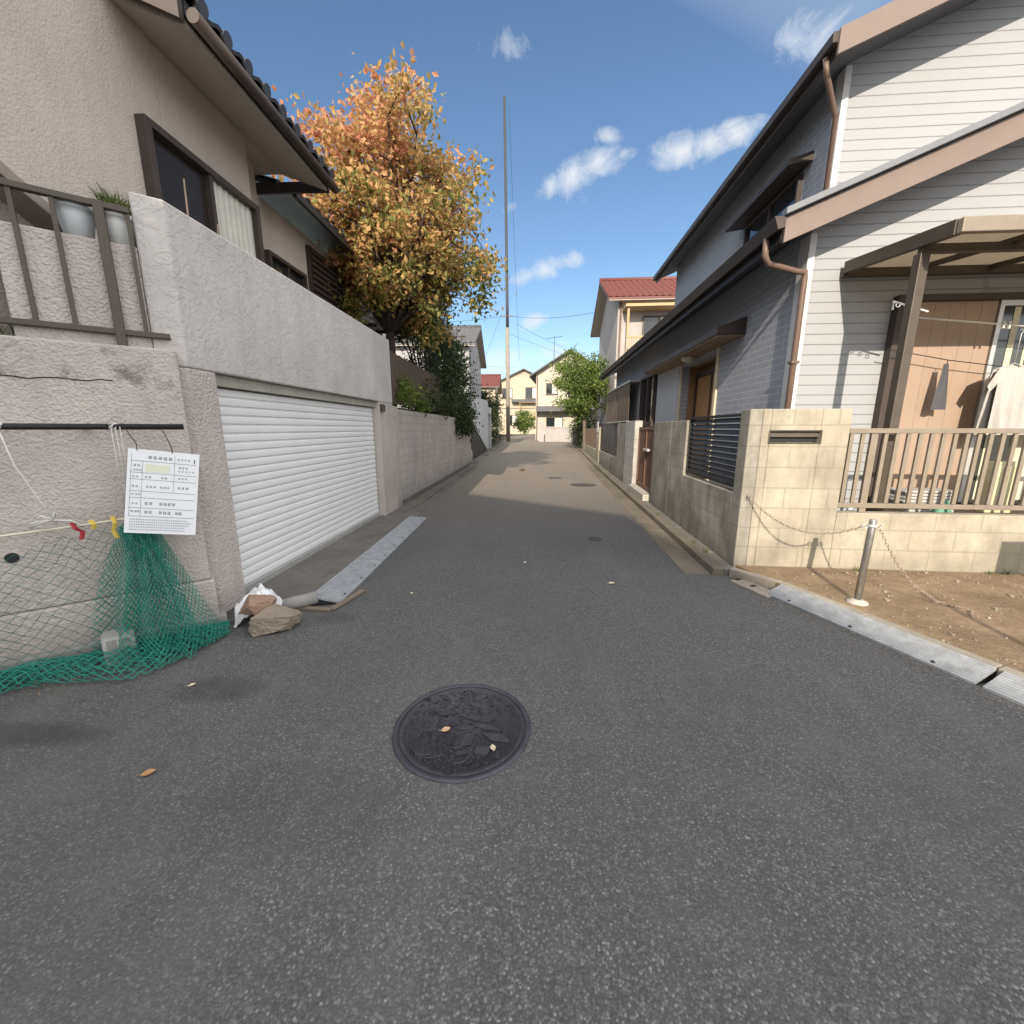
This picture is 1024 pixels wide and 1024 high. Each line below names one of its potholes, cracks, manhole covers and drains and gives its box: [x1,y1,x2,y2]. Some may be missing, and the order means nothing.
manhole cover [392,684,531,784]
